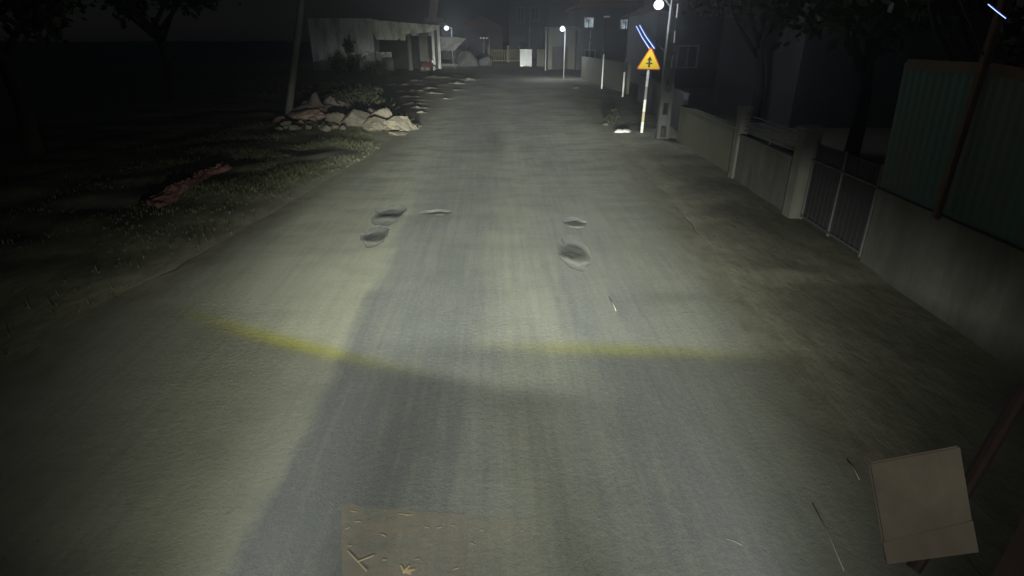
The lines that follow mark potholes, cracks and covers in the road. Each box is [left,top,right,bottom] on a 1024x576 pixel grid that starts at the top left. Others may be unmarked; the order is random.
pothole [359,226,390,248]
pothole [557,235,592,272]
pothole [371,205,407,226]
pothole [563,217,587,230]
pothole [420,209,453,217]
